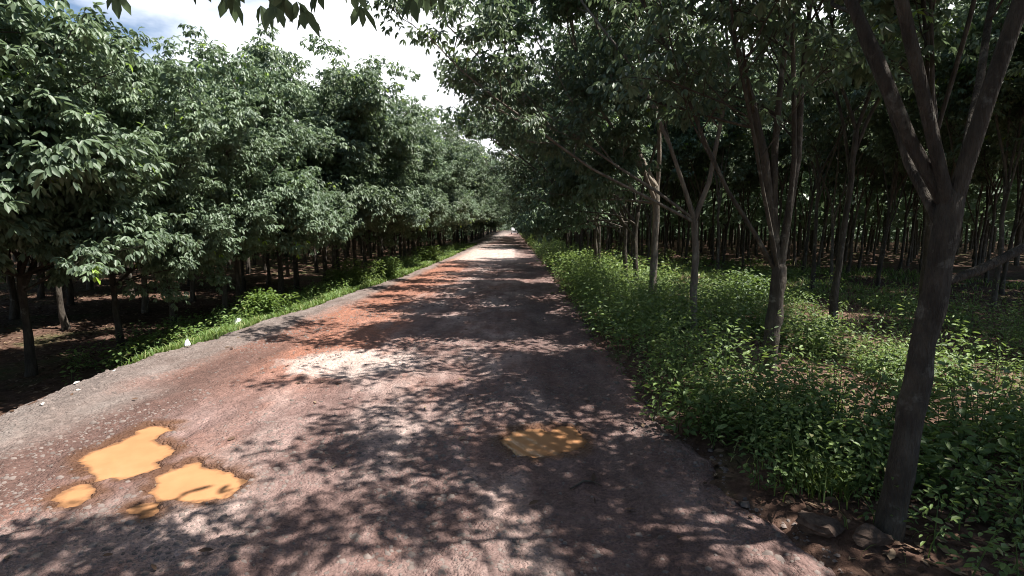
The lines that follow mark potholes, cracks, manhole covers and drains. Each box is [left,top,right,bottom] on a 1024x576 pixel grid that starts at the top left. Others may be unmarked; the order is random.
pothole [136,455,256,508]
pothole [36,479,109,515]
pothole [62,421,186,484]
pothole [115,497,171,523]
pothole [490,422,593,460]
